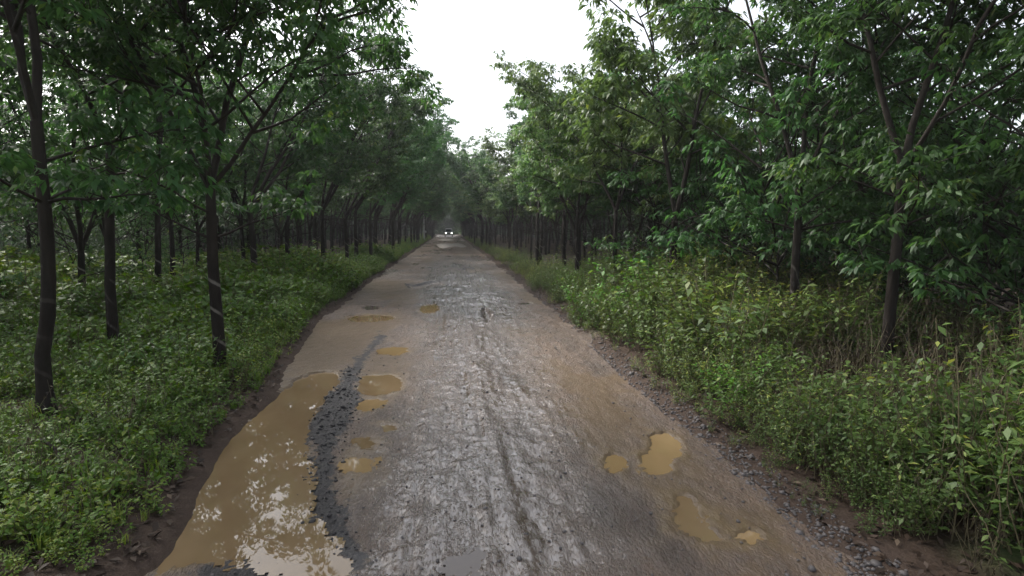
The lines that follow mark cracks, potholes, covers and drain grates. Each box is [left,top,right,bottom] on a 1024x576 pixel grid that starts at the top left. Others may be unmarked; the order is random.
pothole [376,347,412,356]
pothole [635,430,688,476]
pothole [343,313,396,322]
pothole [597,451,632,474]
pothole [352,373,409,397]
pothole [438,547,493,576]
